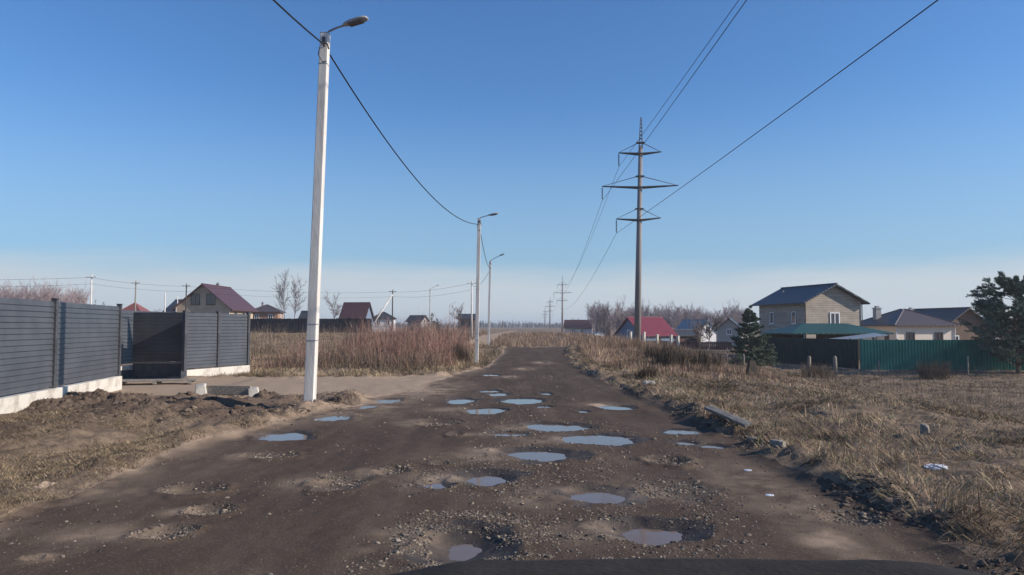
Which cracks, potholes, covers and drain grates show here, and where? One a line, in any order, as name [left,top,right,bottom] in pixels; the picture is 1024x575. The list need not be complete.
pothole [304,508,582,575]
pothole [580,401,650,410]
pothole [406,436,673,477]
pothole [510,500,797,559]
pothole [448,415,641,440]
pothole [460,468,743,542]
pothole [481,396,566,409]
pothole [493,426,696,453]
